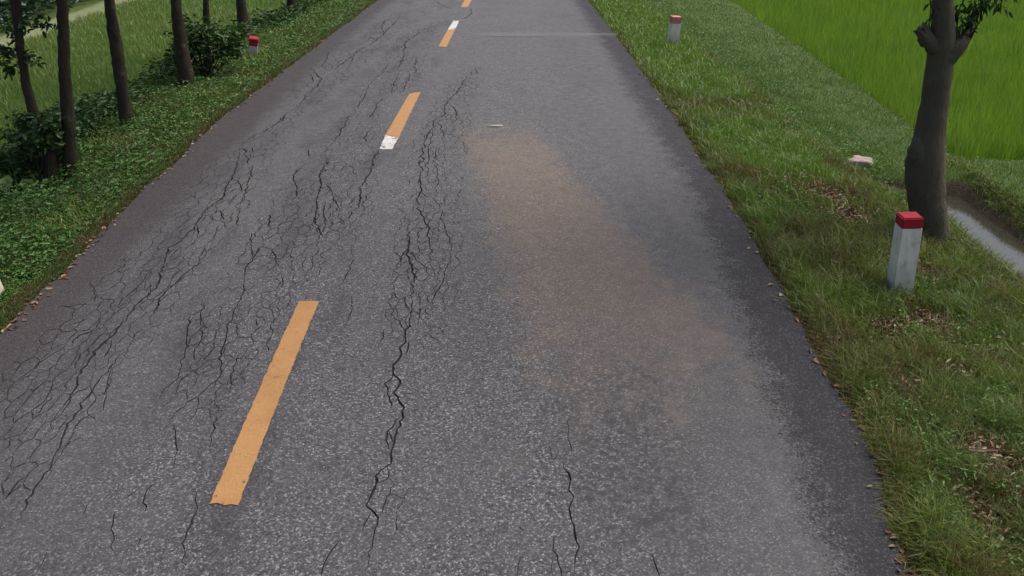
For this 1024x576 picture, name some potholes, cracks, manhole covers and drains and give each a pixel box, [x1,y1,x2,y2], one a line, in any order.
crack [549,416,580,575]
crack [0,11,481,576]
